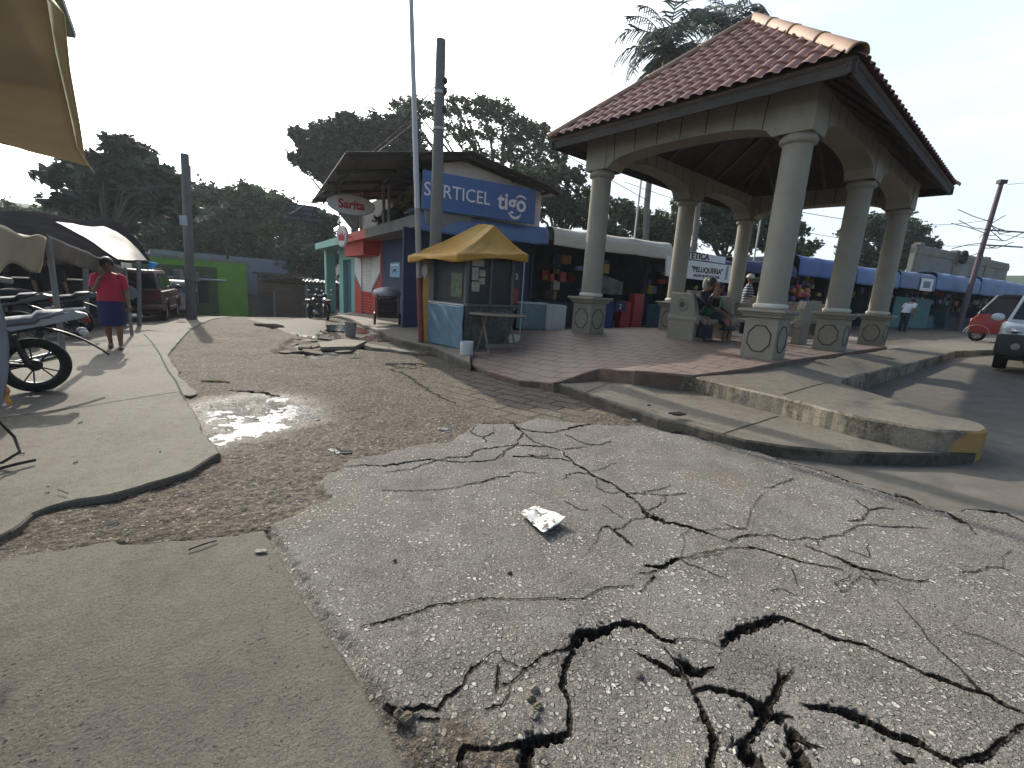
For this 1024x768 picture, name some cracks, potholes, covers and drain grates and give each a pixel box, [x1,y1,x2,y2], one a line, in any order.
crack [390,369,456,403]
crack [344,421,1024,768]
pothole [274,334,370,360]
